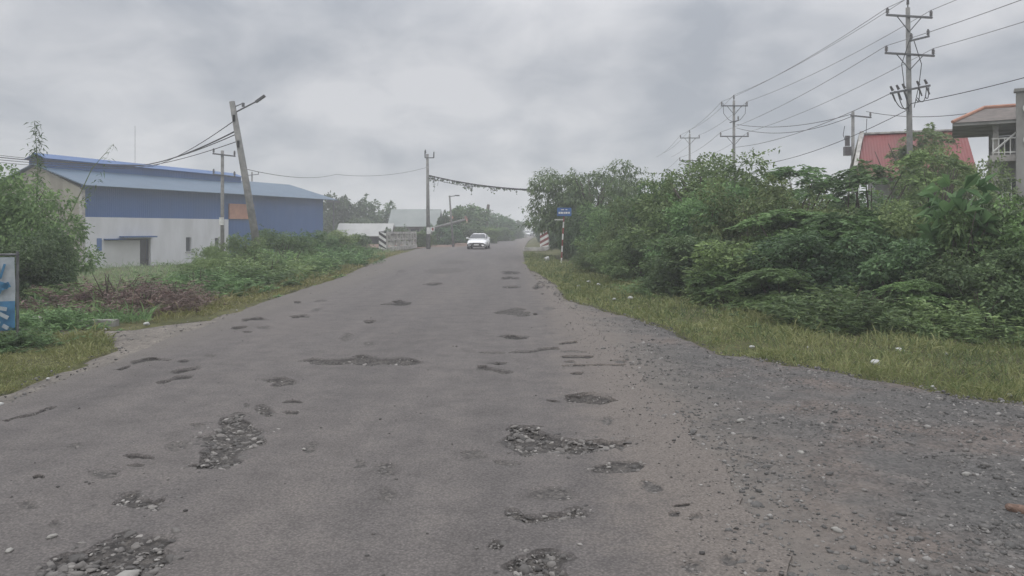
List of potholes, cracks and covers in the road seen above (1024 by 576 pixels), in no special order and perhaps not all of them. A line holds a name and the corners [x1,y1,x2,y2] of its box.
pothole [492,425,638,459]
pothole [155,375,194,384]
pothole [502,504,594,524]
pothole [297,355,424,366]
pothole [564,391,619,405]
pothole [252,376,304,387]
pothole [182,412,280,473]
pothole [255,404,276,417]
pothole [493,547,581,576]
pothole [493,306,534,317]
pothole [18,527,191,576]
pothole [111,490,183,512]
